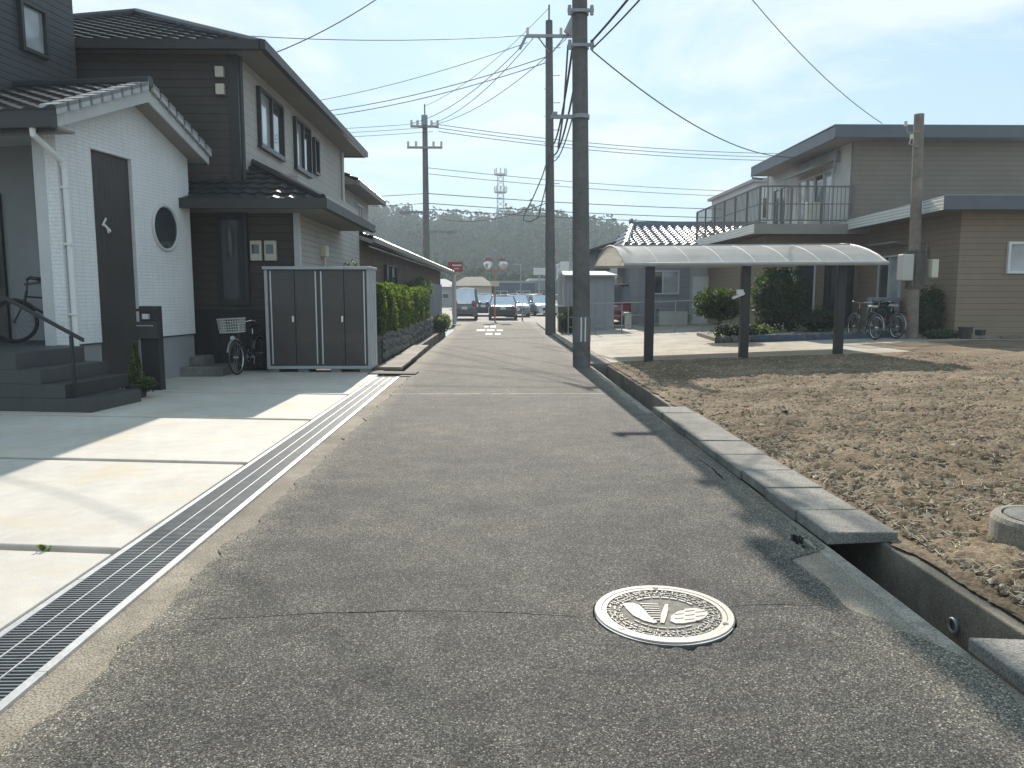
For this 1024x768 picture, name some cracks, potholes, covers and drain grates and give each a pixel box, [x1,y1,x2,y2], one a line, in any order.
drain grate [78,523,224,582]
drain grate [216,459,301,487]
drain grate [356,383,391,391]
drain grate [344,391,383,400]
manhole cover [594,585,735,651]
drain grate [309,410,360,423]
crack [177,610,577,622]
drain grate [287,422,345,439]
drain grate [0,671,47,715]
drain grate [0,579,157,675]
drain grate [161,486,269,525]
